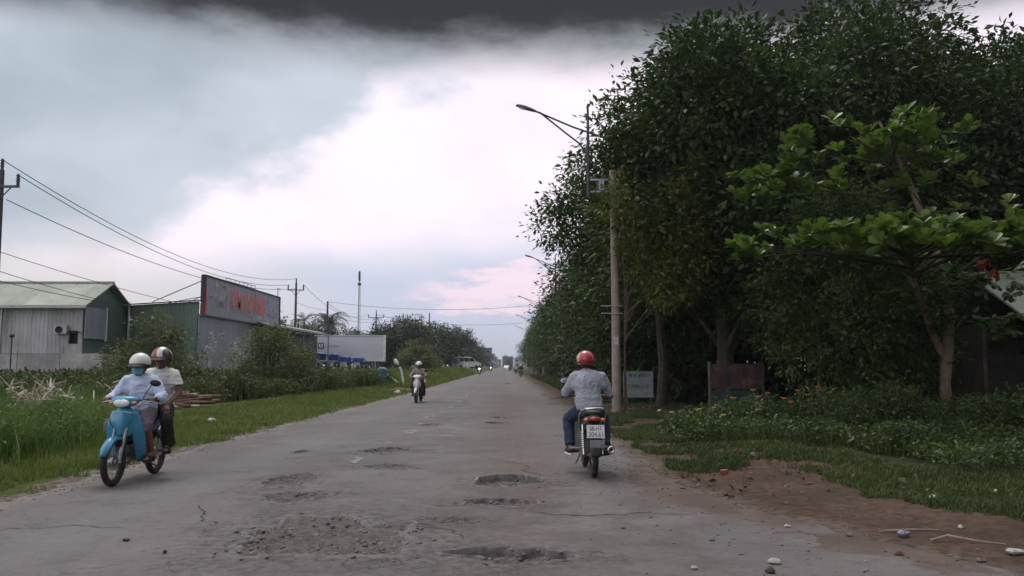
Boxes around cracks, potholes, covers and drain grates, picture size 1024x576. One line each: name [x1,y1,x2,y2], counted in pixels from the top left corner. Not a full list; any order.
pothole [434,546,584,568]
pothole [457,497,542,508]
pothole [470,474,550,487]
pothole [226,514,419,559]
pothole [259,491,334,505]
